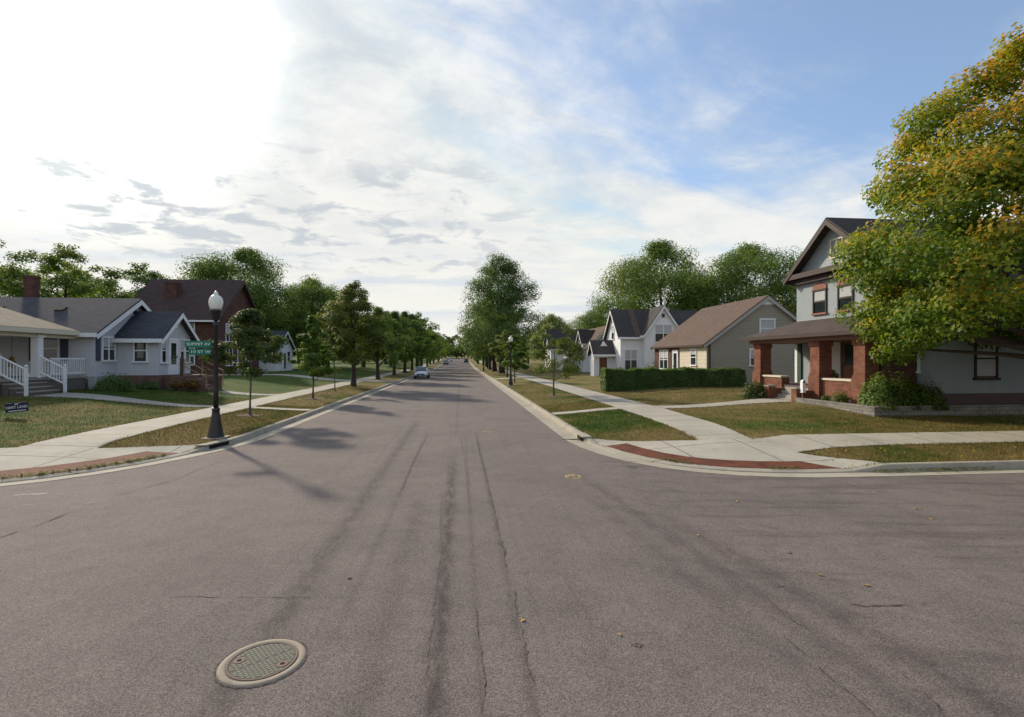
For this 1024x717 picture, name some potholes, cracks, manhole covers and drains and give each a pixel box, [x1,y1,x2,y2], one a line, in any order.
crack [476,437,506,567]
manhole cover [213,638,308,689]
crack [767,600,944,715]
crack [475,609,486,711]
crack [425,490,443,671]
